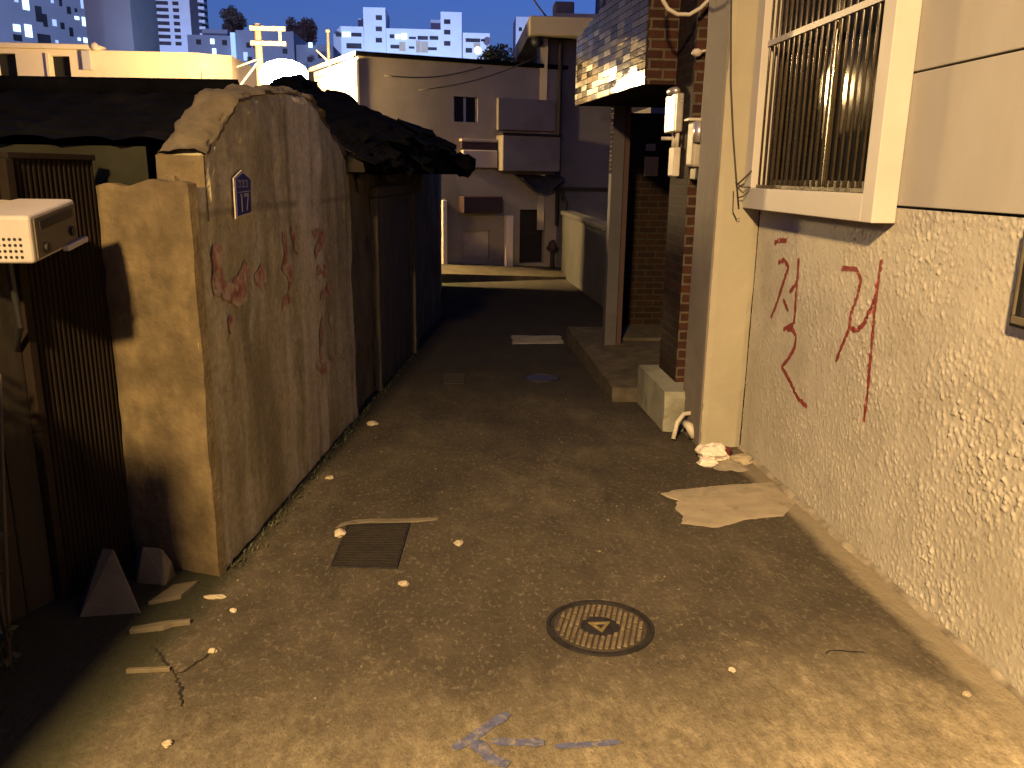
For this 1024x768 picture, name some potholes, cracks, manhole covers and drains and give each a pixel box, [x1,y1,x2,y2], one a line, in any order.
crack [150,646,209,707]
manhole cover [546,600,655,657]
